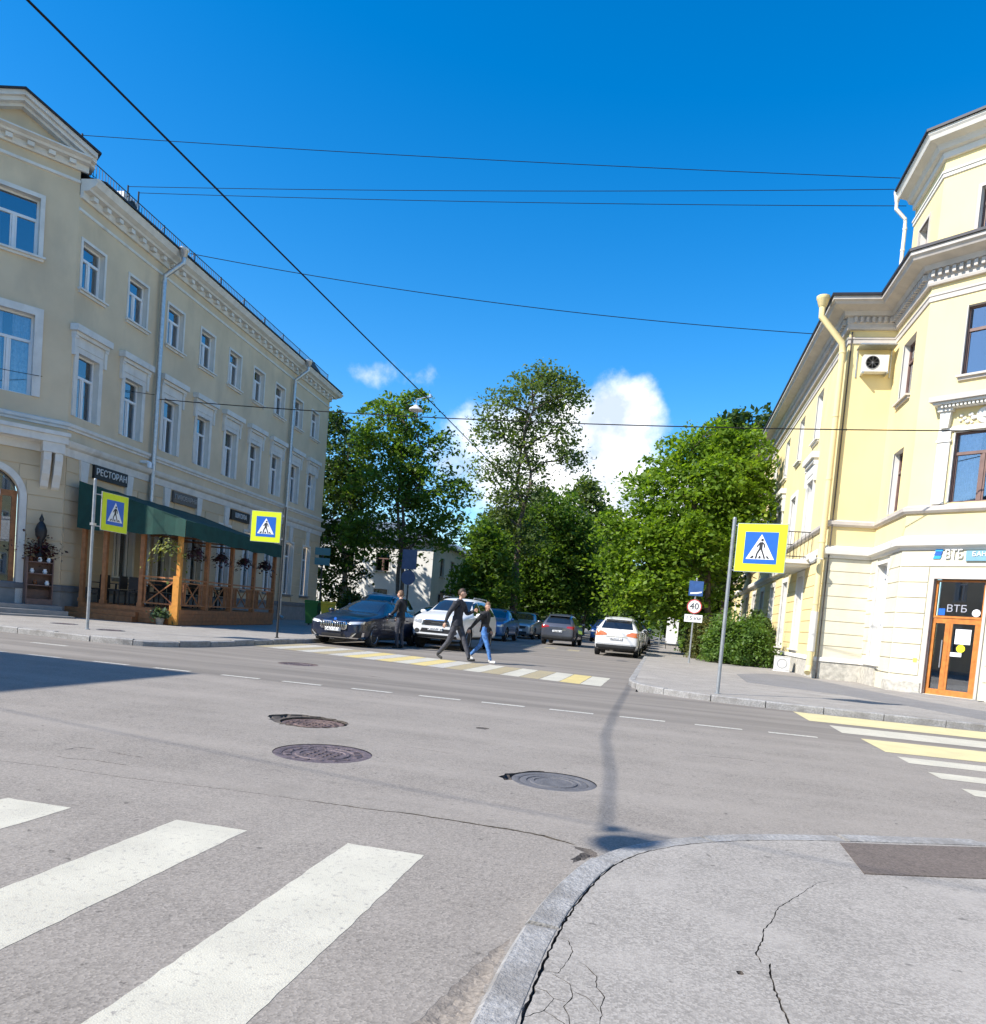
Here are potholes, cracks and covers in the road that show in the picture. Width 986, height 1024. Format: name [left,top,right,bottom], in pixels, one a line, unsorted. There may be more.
crack [524,938,605,1024]
manhole cover [272,744,372,763]
manhole cover [281,719,344,728]
manhole cover [511,772,596,792]
crack [755,881,825,1024]
pothole [571,846,598,863]
